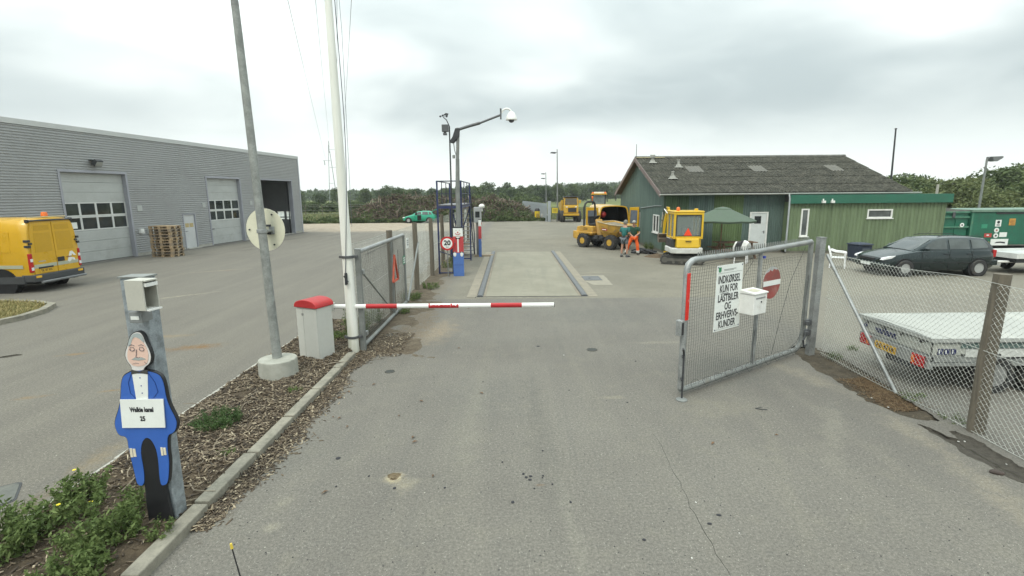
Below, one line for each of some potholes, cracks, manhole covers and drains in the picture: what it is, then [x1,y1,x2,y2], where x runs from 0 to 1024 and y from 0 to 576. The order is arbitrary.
manhole cover [581,275,613,285]
crack [654,435,730,575]
